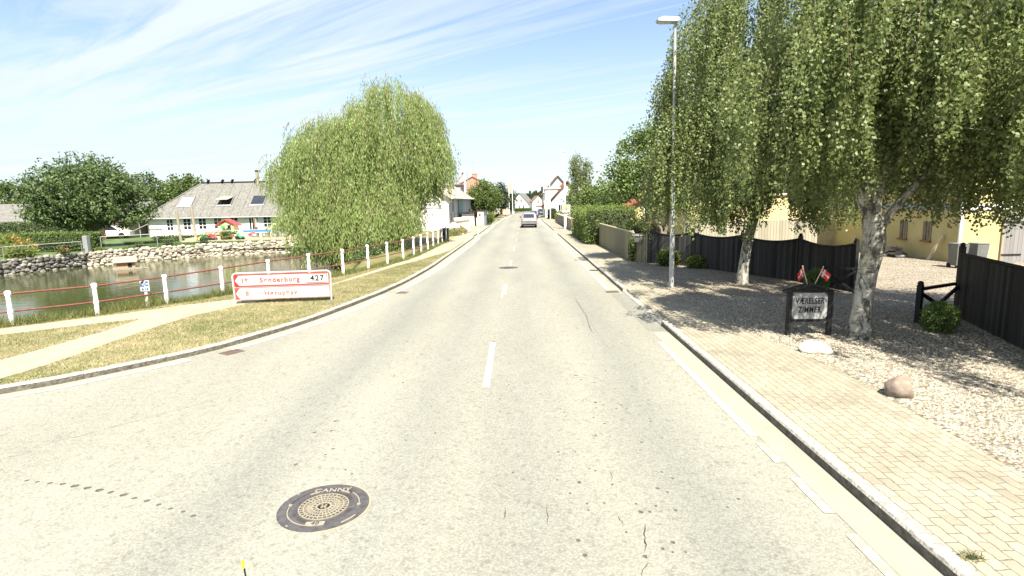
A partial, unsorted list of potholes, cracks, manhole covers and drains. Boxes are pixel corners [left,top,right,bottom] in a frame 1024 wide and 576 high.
manhole cover [276,484,371,533]
